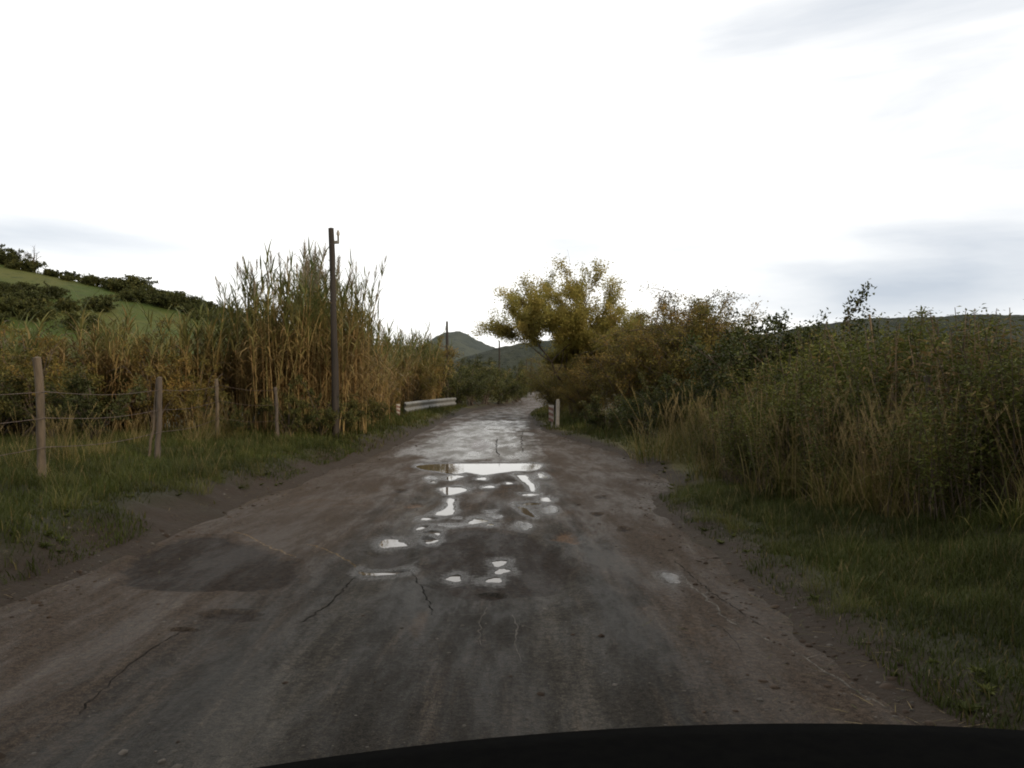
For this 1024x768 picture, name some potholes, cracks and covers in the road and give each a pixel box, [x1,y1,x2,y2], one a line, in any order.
pothole [438,486,469,495]
pothole [432,498,457,516]
crack [79,632,182,716]
pothole [413,528,582,602]
pothole [514,503,536,518]
crack [406,571,434,616]
pothole [414,462,543,475]
pothole [513,473,537,492]
pothole [377,538,410,548]
pothole [540,505,558,514]
pothole [515,521,532,530]
